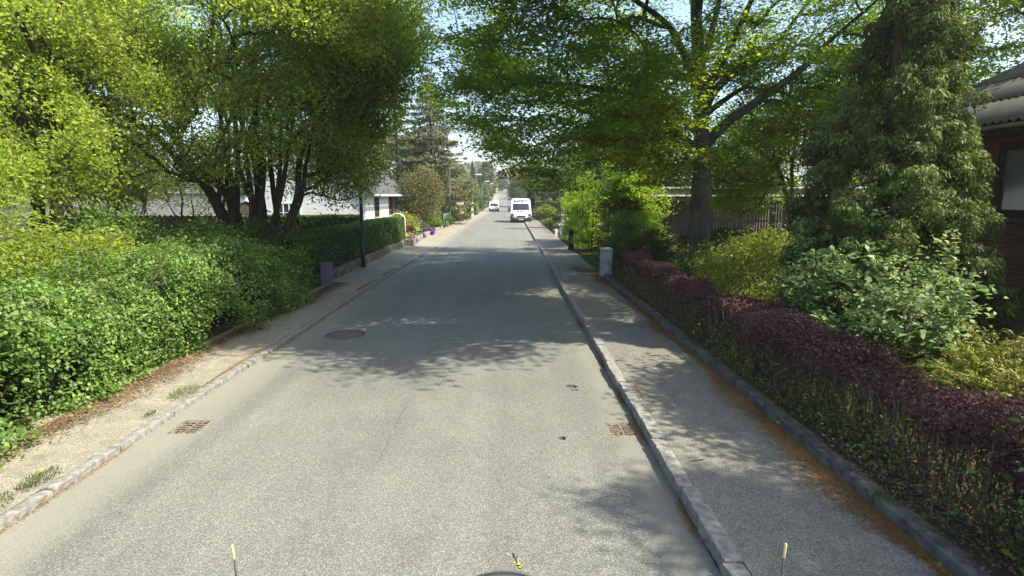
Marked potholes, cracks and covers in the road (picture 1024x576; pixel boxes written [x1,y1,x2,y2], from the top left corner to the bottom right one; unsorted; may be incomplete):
drain grate [167,421,212,434]
manhole cover [325,330,366,339]
drain grate [604,423,639,436]
